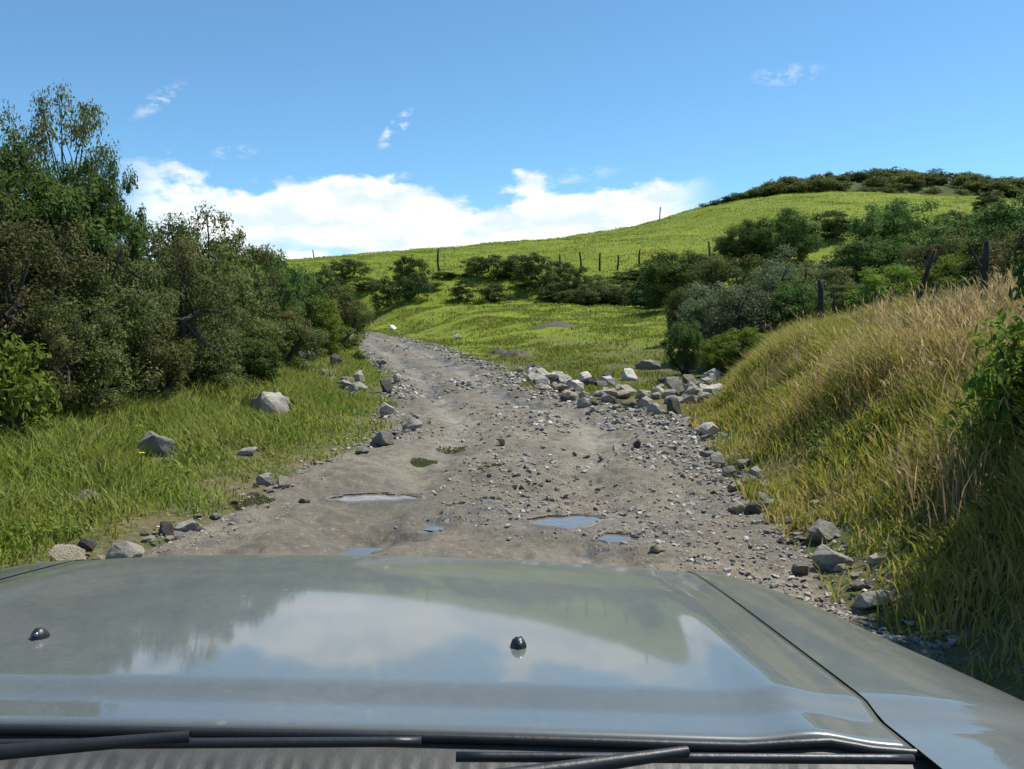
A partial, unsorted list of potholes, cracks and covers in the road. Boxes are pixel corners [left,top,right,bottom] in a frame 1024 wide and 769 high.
pothole [590,530,643,544]
pothole [520,513,614,532]
pothole [323,491,427,503]
